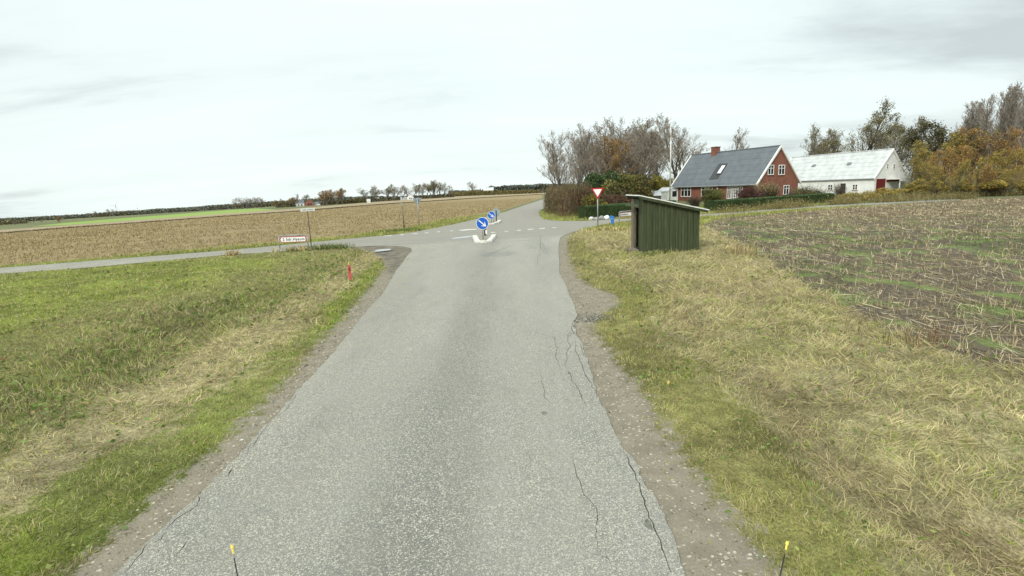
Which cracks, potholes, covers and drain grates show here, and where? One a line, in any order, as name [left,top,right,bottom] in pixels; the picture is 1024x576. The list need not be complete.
crack [623,451,669,567]
